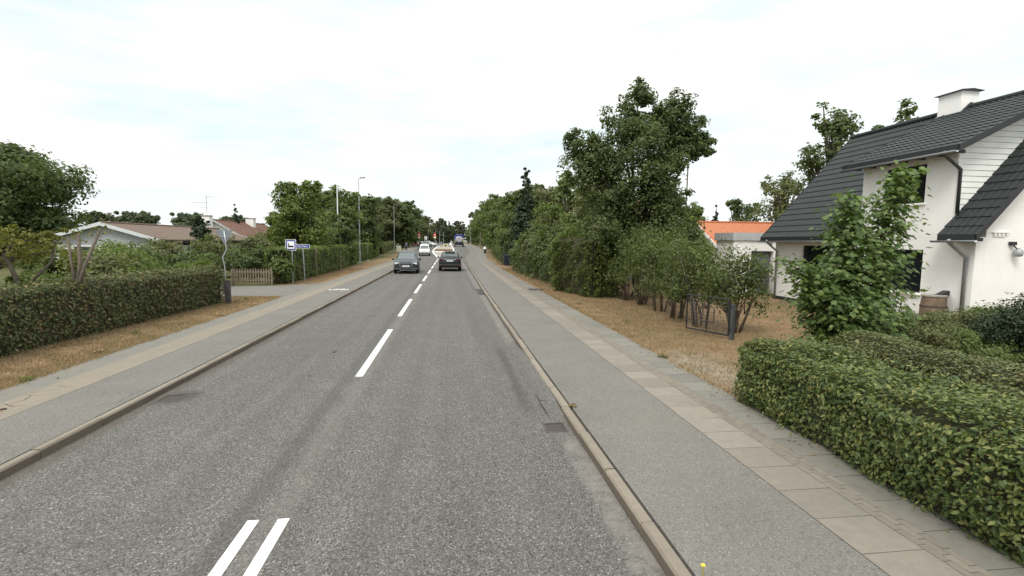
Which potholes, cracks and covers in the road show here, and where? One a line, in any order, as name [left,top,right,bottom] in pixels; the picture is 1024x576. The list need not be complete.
drain grate [542,422,569,433]
